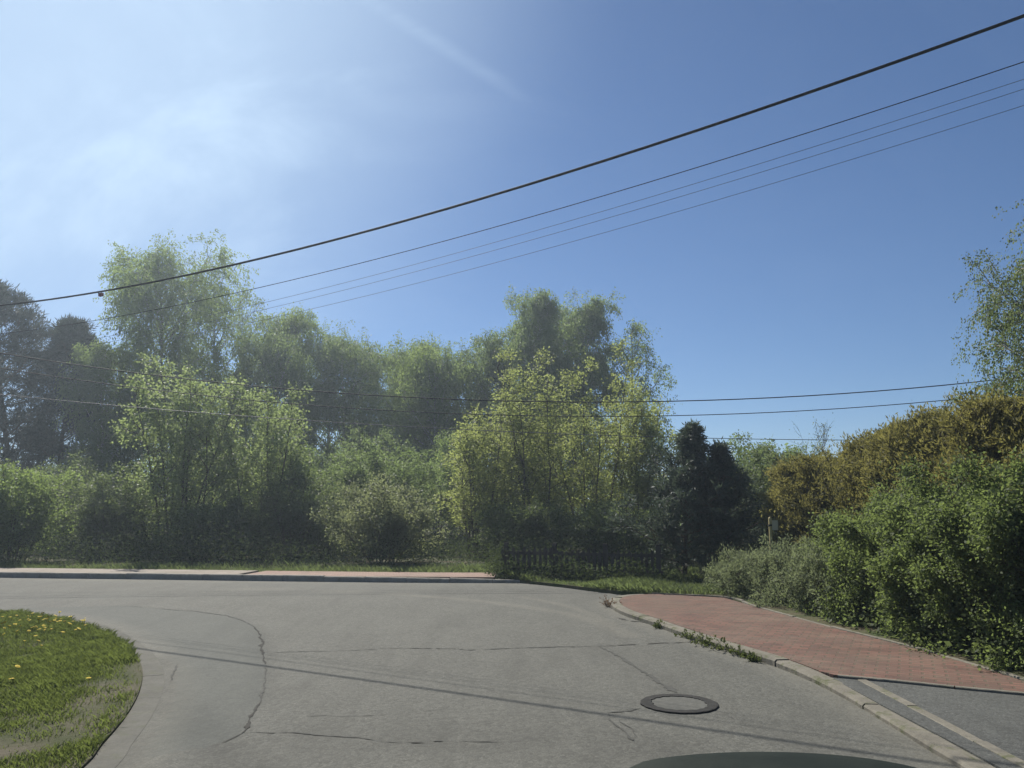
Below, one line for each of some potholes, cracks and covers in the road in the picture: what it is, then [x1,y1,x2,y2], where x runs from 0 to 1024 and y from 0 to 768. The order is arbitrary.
crack [264,708,499,743]
crack [286,642,682,740]
manhole cover [640,694,719,714]
